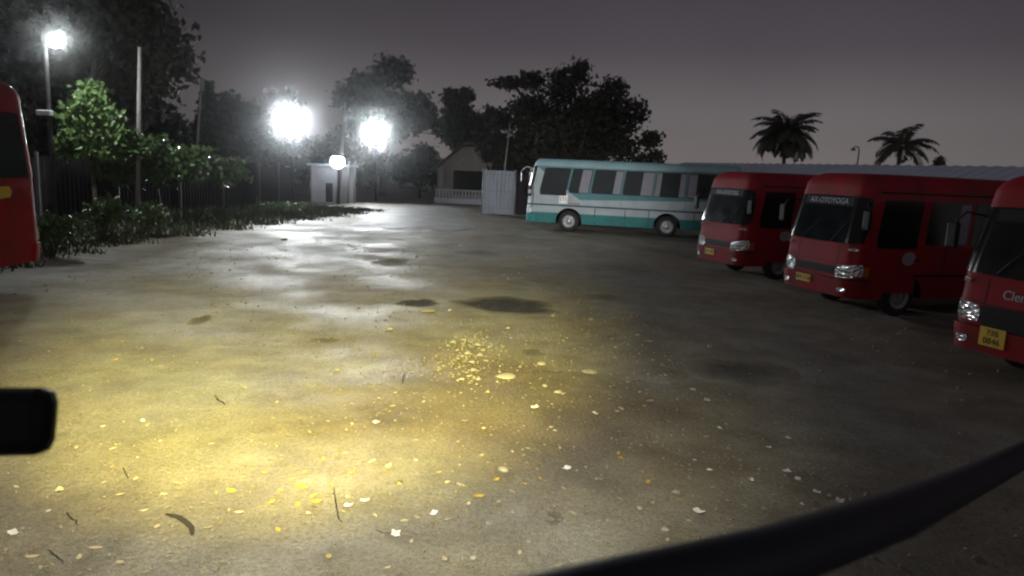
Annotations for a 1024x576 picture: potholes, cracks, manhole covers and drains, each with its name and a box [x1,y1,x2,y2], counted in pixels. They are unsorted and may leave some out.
pothole [187,315,212,325]
pothole [448,296,562,316]
pothole [394,299,440,308]
